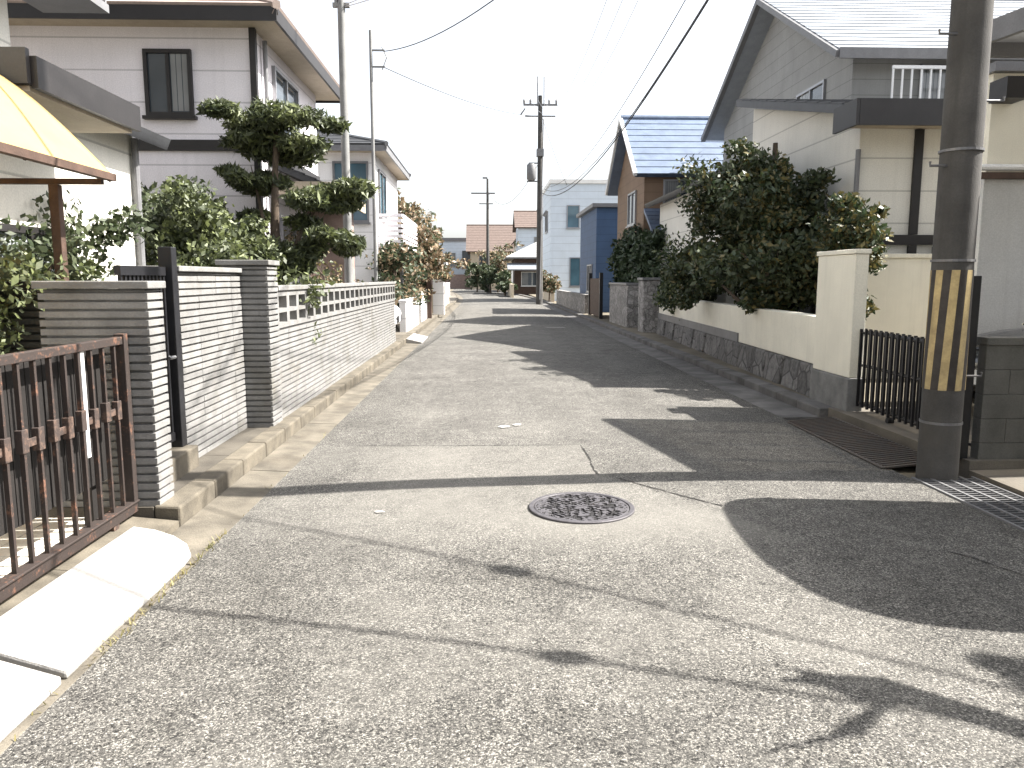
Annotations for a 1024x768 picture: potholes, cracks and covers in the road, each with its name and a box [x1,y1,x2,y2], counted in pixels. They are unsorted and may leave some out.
drain grate [911,476,1024,532]
manhole cover [529,492,635,524]
crack [616,477,722,506]
